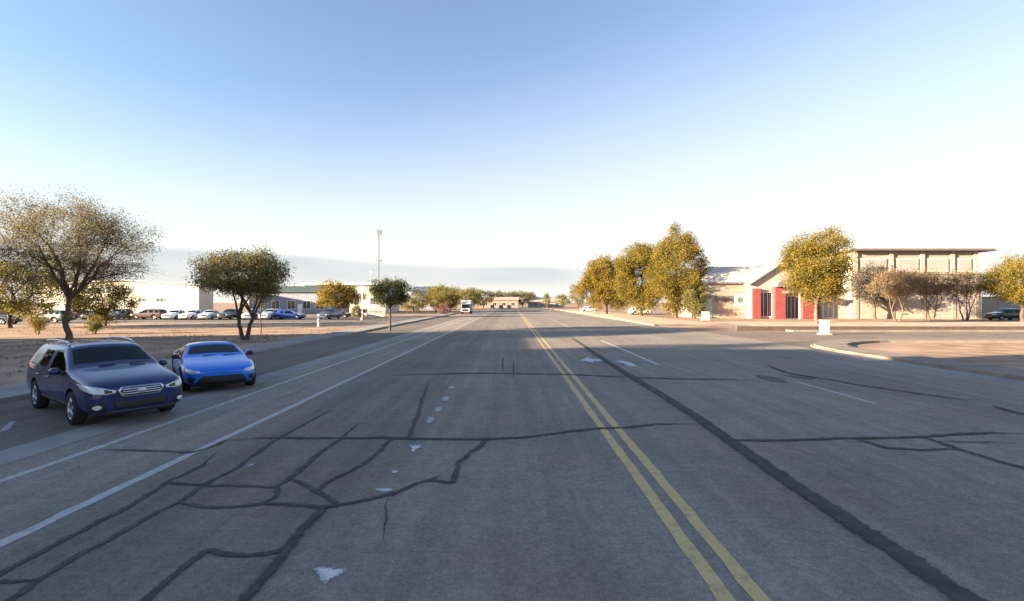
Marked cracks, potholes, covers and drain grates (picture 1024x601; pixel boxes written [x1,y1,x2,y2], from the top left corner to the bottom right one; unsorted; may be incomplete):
crack [852,436,1024,468]
crack [99,440,226,453]
crack [381,496,389,542]
crack [401,358,740,437]
crack [768,365,977,400]
